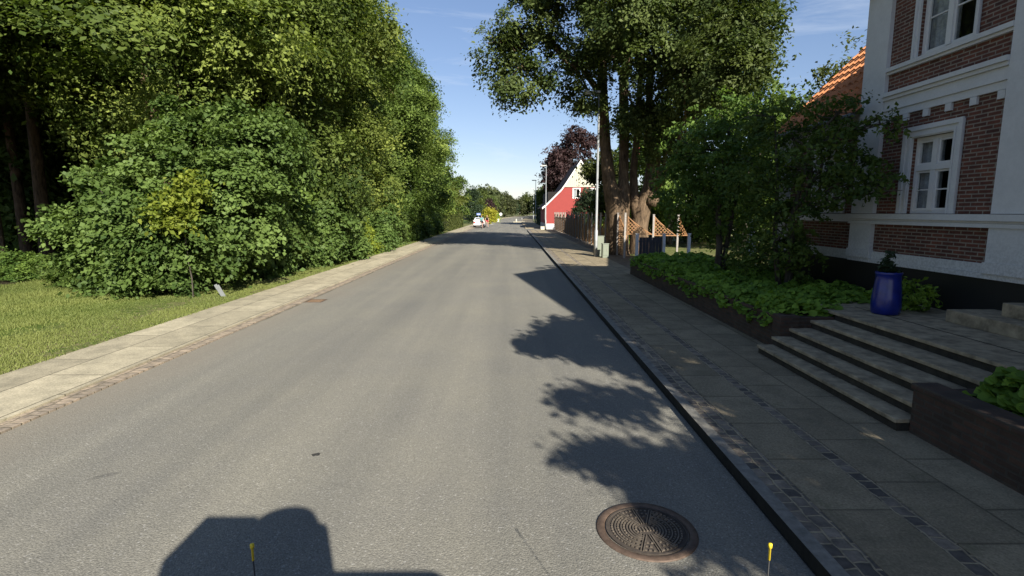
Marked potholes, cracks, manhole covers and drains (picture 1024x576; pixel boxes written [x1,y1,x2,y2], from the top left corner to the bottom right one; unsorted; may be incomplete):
manhole cover [596,502,699,563]
